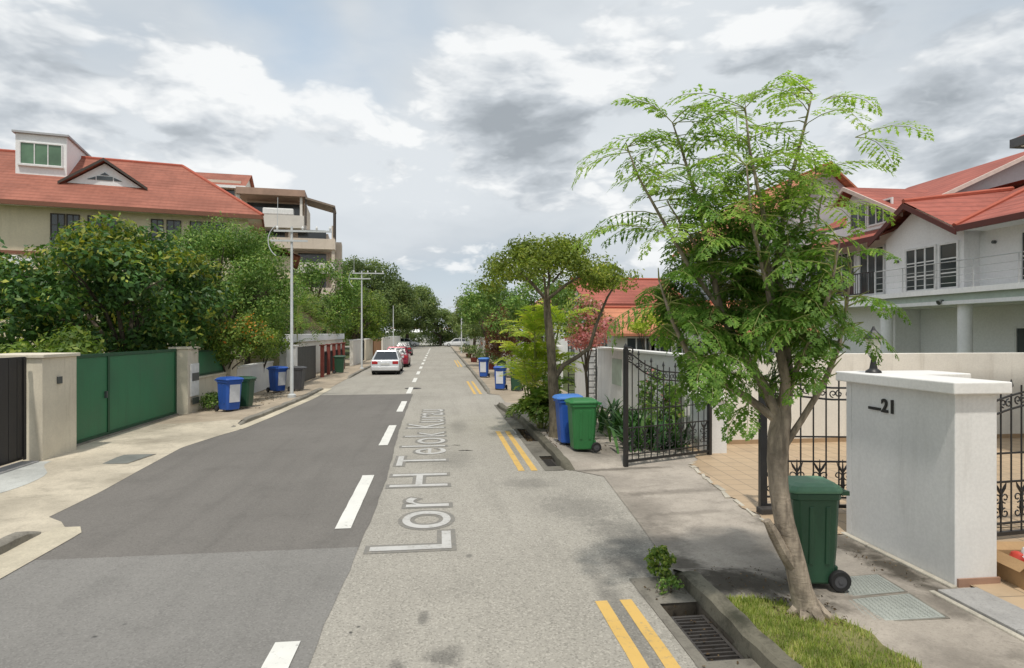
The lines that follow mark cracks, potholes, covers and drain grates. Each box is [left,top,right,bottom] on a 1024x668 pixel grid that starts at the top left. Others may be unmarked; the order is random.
manhole cover [102,454,156,464]
drain grate [658,602,751,662]
drain grate [539,456,558,466]
